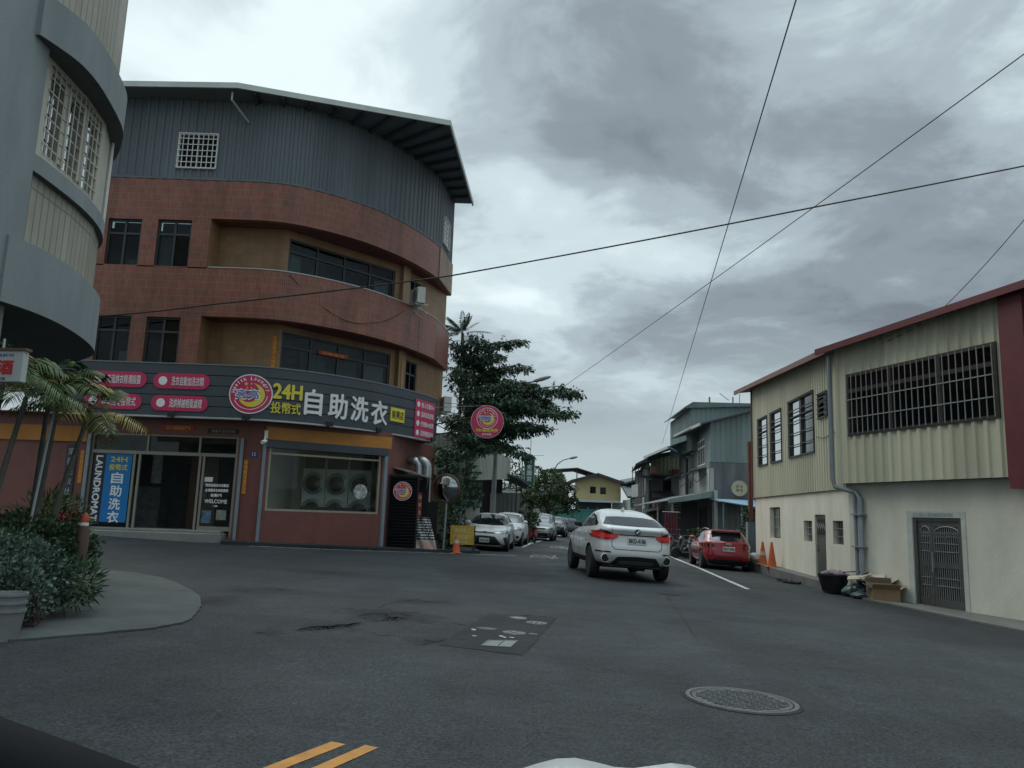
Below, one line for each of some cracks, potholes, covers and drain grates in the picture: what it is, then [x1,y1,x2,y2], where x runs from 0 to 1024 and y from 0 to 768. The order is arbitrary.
pothole [293,622,367,631]
pothole [358,613,408,622]
manhole cover [681,687,804,715]
